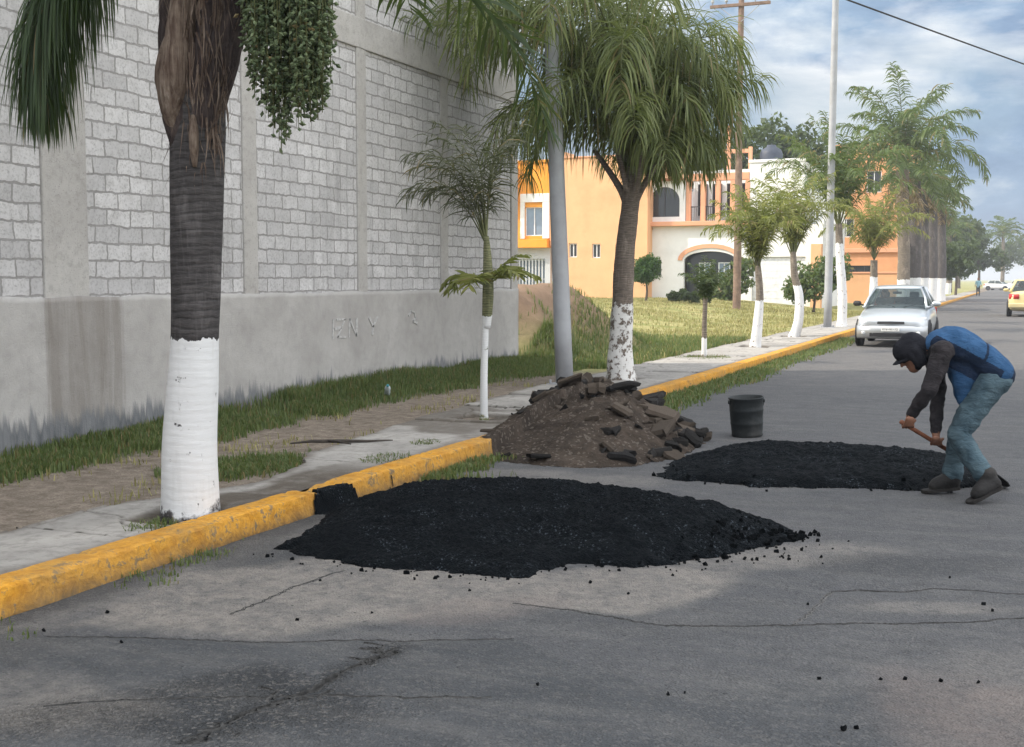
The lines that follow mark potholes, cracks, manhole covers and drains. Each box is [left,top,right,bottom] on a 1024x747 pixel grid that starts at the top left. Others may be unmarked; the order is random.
crack [512,588,1024,627]
crack [230,570,343,614]
